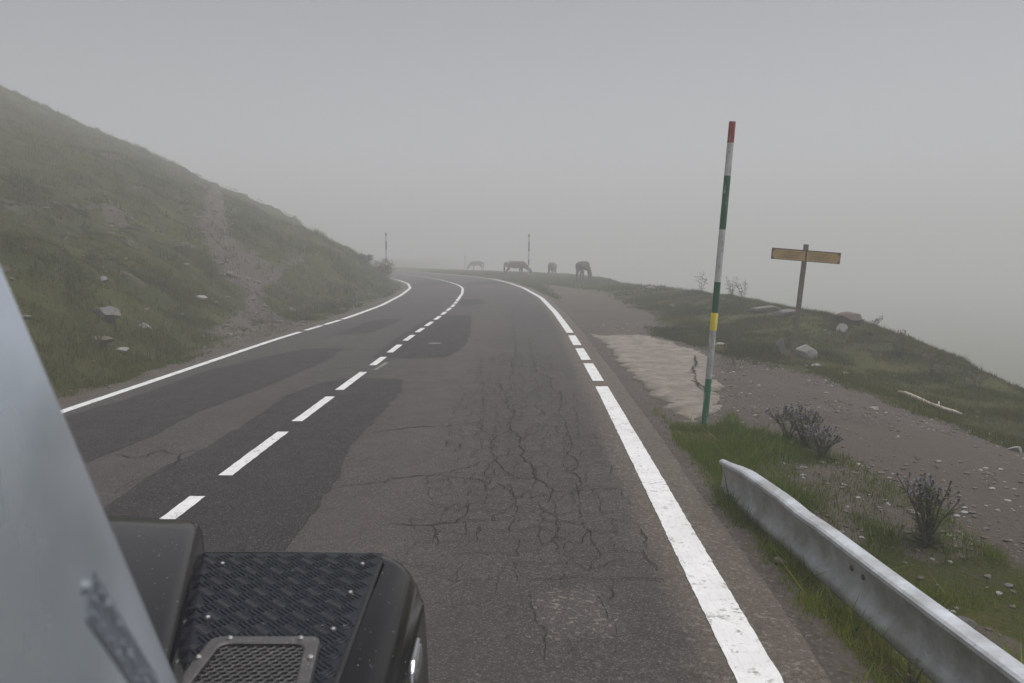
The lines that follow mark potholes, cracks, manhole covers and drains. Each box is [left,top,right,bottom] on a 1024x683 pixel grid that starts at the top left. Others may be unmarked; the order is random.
crack [691,355,718,393]
crack [341,464,488,486]
crack [115,449,203,493]
crack [395,312,665,655]
